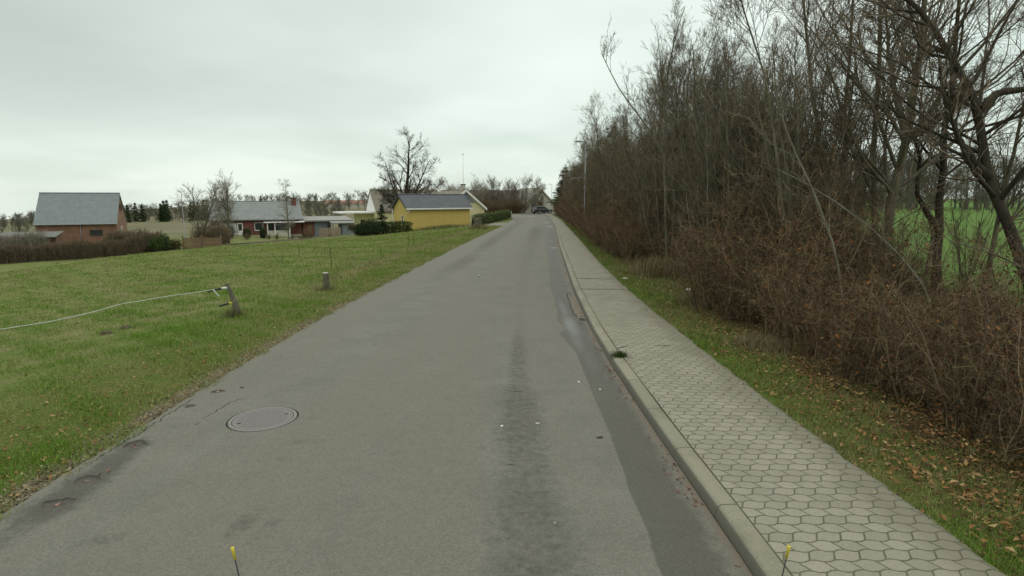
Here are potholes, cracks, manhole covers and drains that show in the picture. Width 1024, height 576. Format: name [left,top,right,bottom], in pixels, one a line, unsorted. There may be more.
pothole [123,440,148,448]
crack [86,399,238,466]
pothole [73,475,101,485]
pothole [41,497,77,509]
manhole cover [226,407,299,432]
